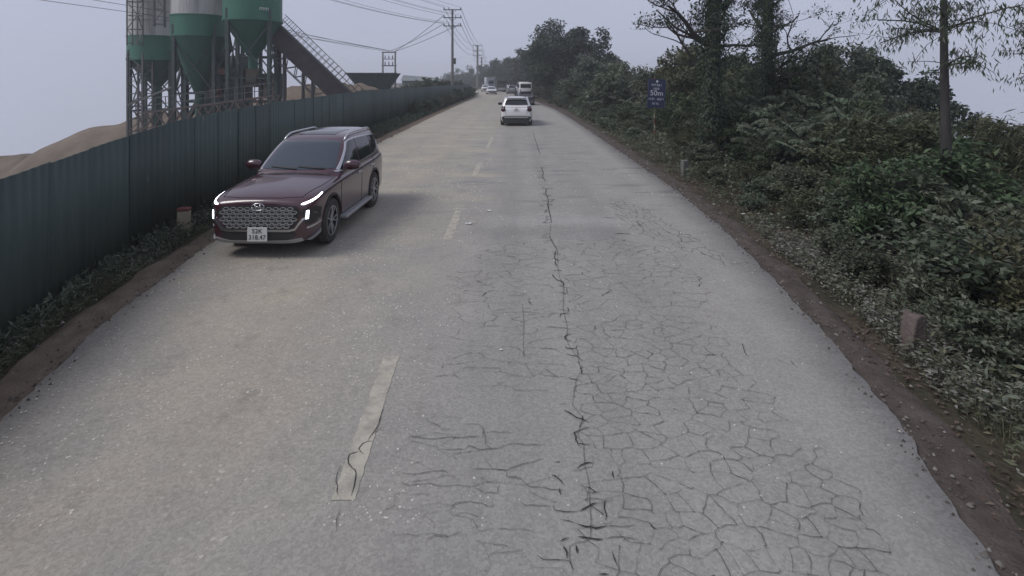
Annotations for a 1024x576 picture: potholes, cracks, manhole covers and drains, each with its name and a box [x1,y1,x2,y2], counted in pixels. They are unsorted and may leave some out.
crack [336,407,384,528]
crack [386,134,891,576]
